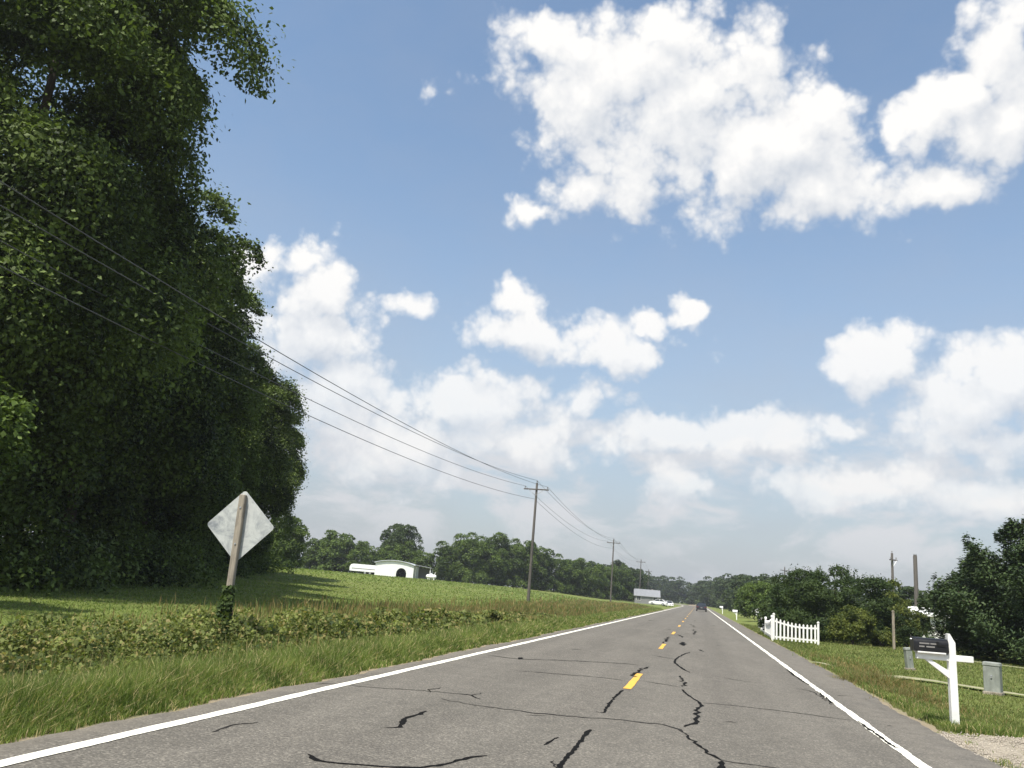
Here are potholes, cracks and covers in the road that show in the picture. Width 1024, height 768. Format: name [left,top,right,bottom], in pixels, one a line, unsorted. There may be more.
crack [354,685,775,768]
